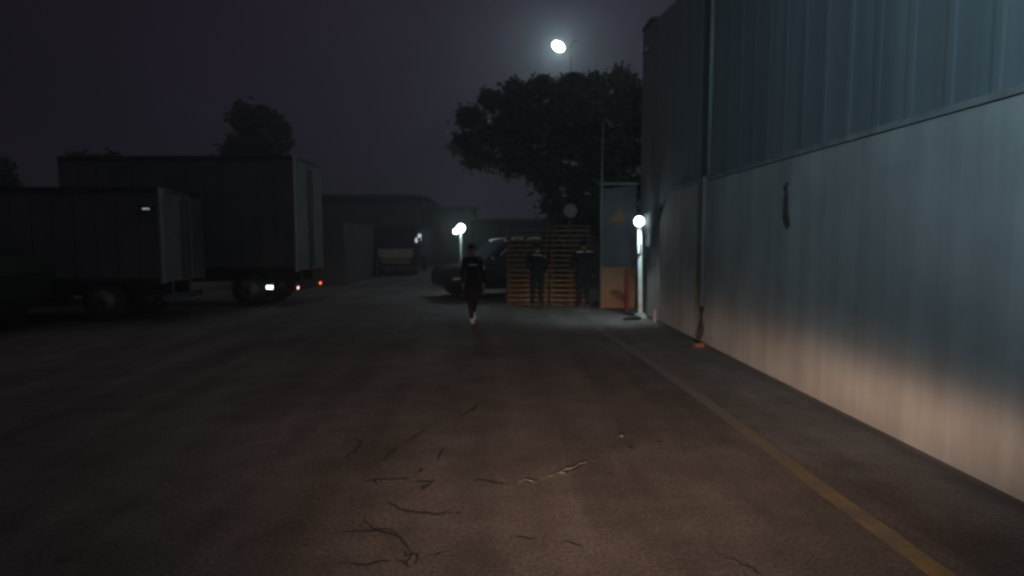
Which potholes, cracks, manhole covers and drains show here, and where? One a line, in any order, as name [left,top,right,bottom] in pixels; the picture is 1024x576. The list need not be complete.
crack [723,555,763,576]
crack [475,460,614,485]
crack [339,430,461,568]
